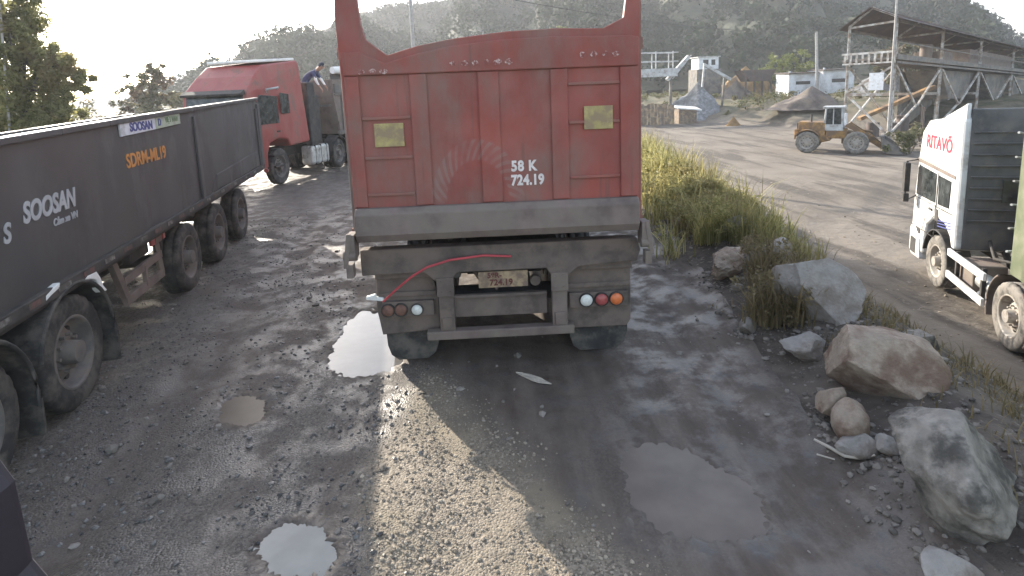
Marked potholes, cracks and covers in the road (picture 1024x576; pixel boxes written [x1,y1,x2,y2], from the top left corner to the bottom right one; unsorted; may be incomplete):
pothole [605,433,790,558]
pothole [204,389,280,434]
pothole [237,510,354,576]
pothole [318,307,411,384]
